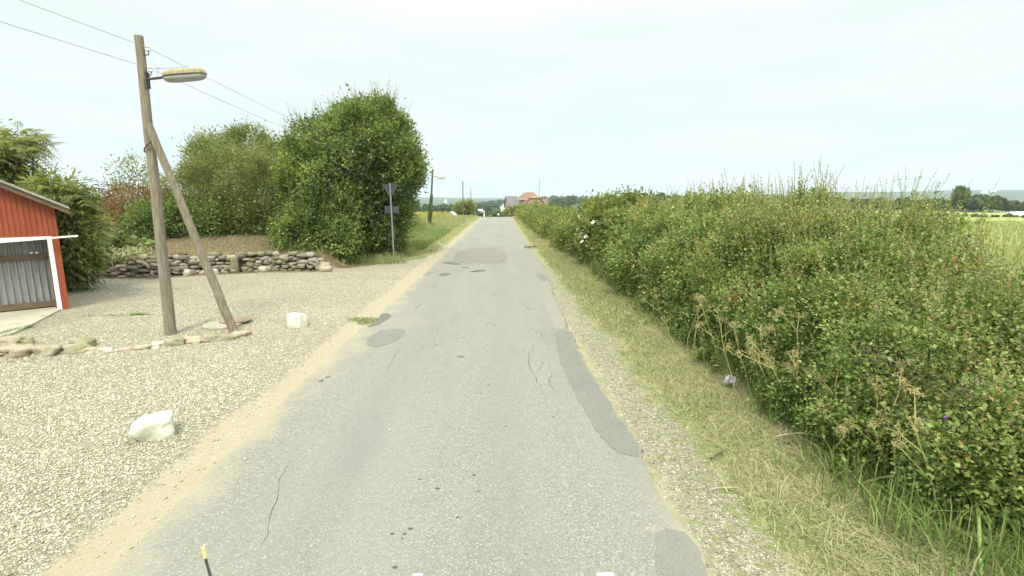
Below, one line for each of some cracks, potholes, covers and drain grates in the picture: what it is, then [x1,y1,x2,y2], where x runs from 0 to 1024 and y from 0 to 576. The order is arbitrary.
crack [528,331,554,404]
crack [259,462,290,549]
